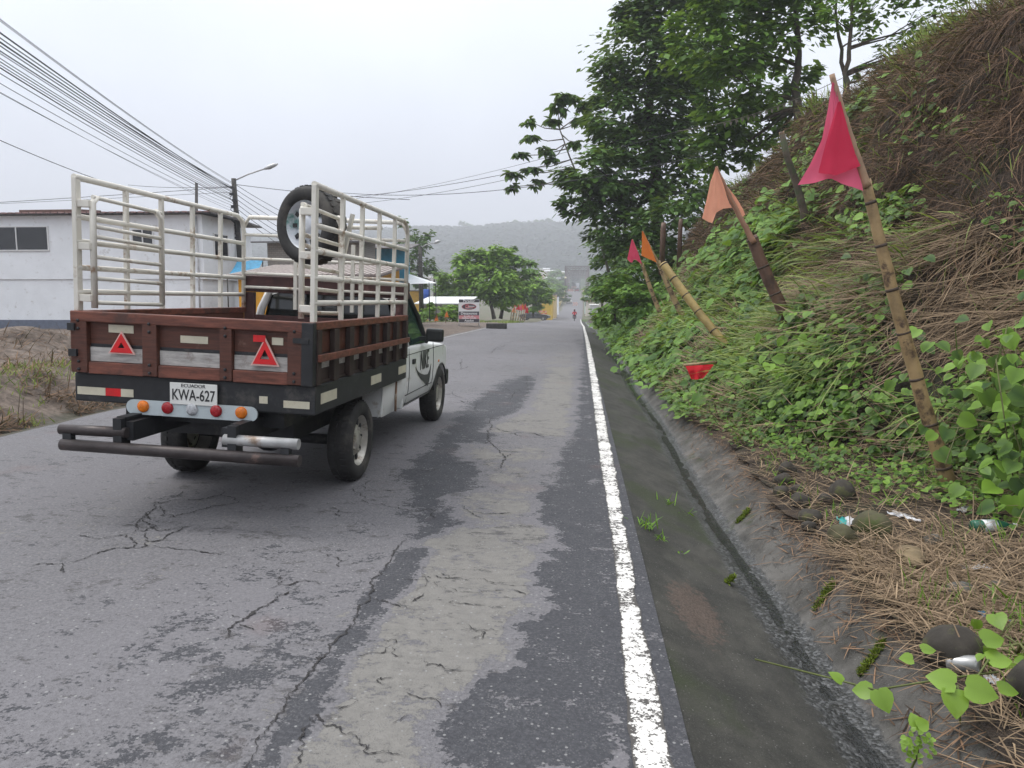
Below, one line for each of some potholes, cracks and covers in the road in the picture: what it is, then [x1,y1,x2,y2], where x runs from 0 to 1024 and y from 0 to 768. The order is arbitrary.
crack [226,577,317,638]
crack [353,734,401,755]
crack [34,491,239,573]
crack [294,716,314,768]
